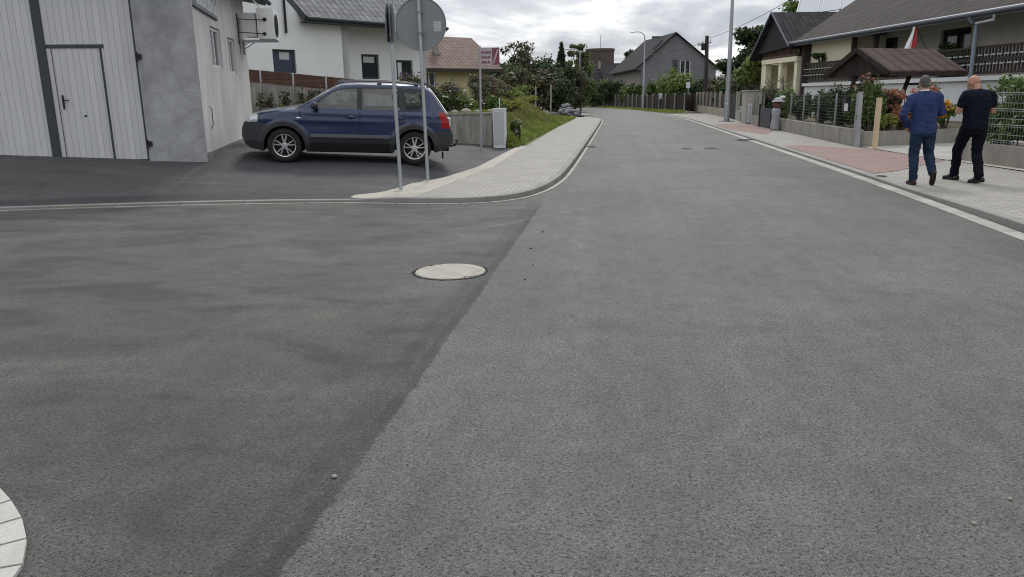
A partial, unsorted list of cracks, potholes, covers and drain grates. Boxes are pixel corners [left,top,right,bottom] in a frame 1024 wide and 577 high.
manhole cover [411,264,488,281]
